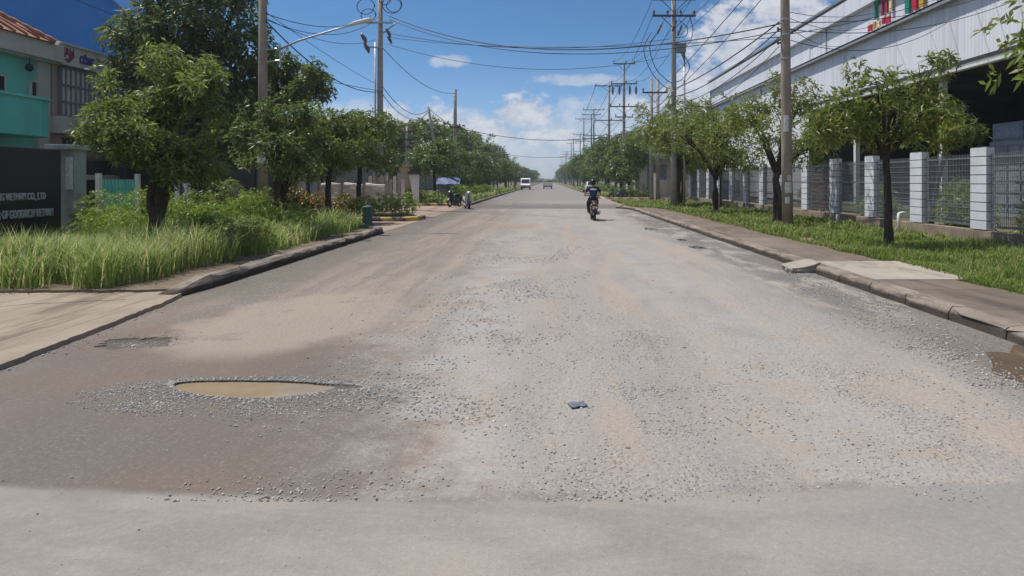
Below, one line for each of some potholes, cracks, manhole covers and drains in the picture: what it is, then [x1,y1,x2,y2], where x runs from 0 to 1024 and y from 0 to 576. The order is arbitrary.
pothole [94,337,173,350]
pothole [173,380,361,398]
